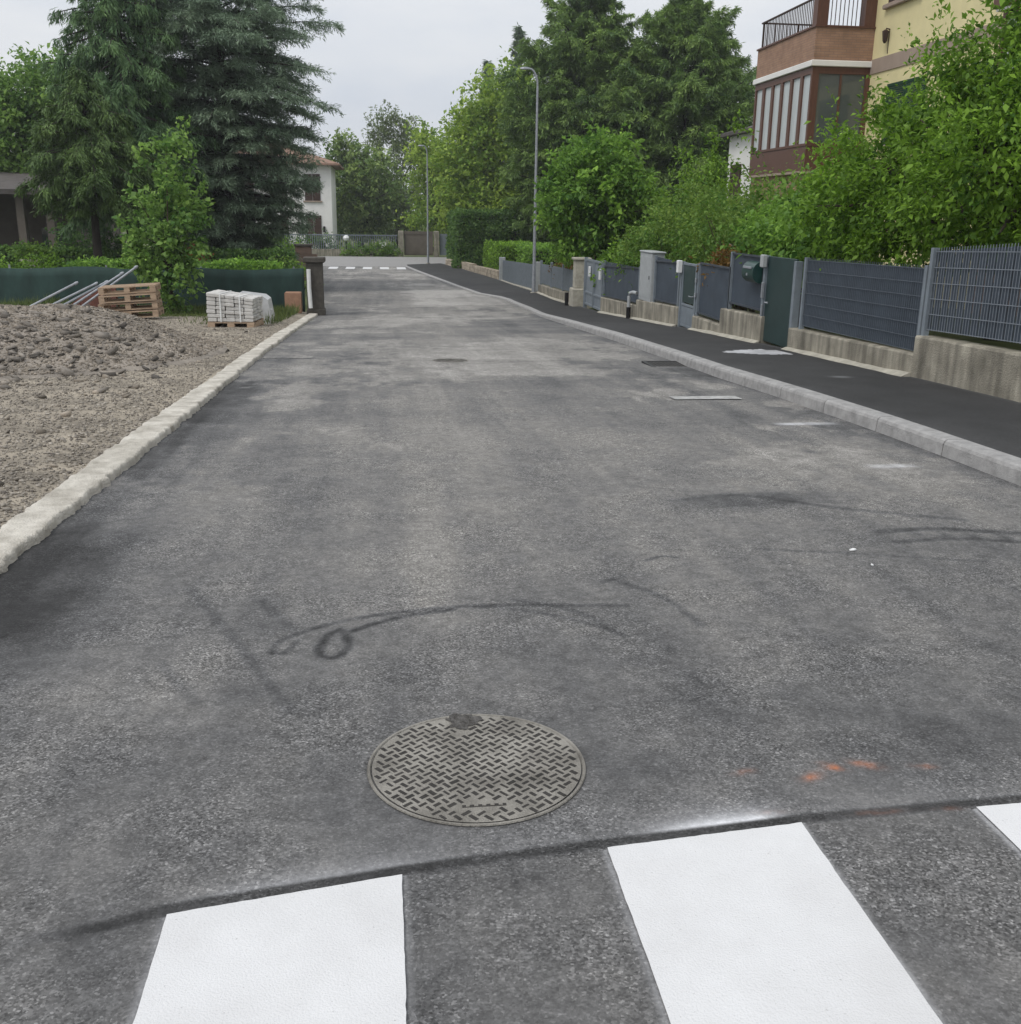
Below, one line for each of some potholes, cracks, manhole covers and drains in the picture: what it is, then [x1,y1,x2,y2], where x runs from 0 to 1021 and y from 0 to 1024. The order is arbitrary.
manhole cover [367,713,586,826]
